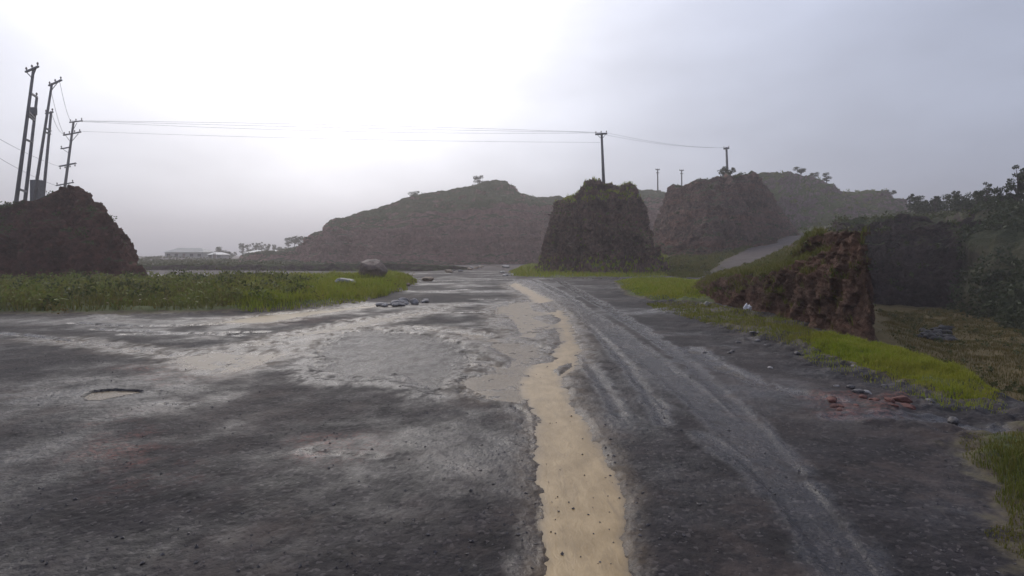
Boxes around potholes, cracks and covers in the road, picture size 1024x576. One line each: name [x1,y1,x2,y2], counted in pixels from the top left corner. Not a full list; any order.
pothole [81,388,143,401]
